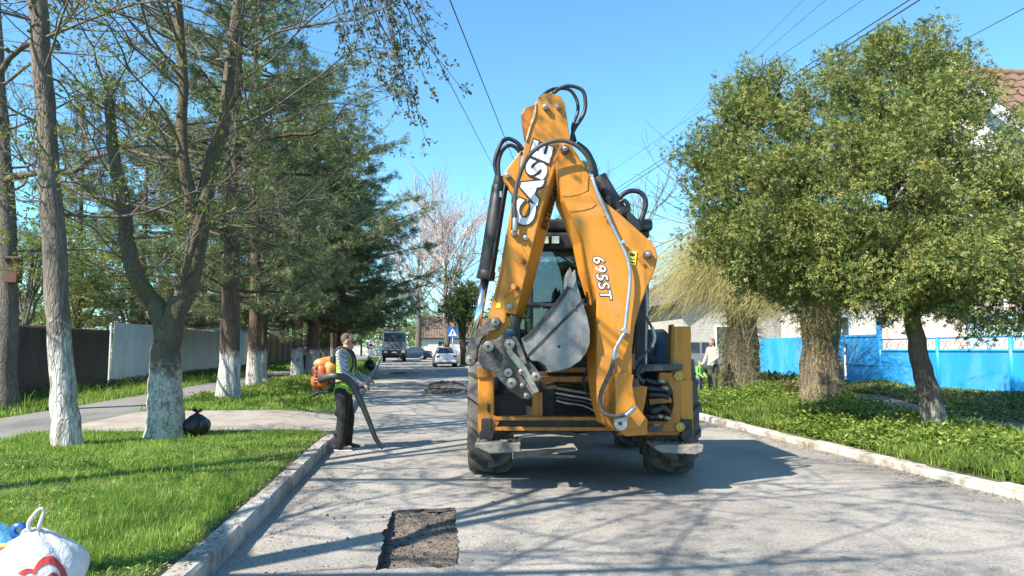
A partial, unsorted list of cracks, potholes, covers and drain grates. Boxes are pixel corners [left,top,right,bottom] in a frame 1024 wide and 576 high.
pothole [375,508,460,571]
